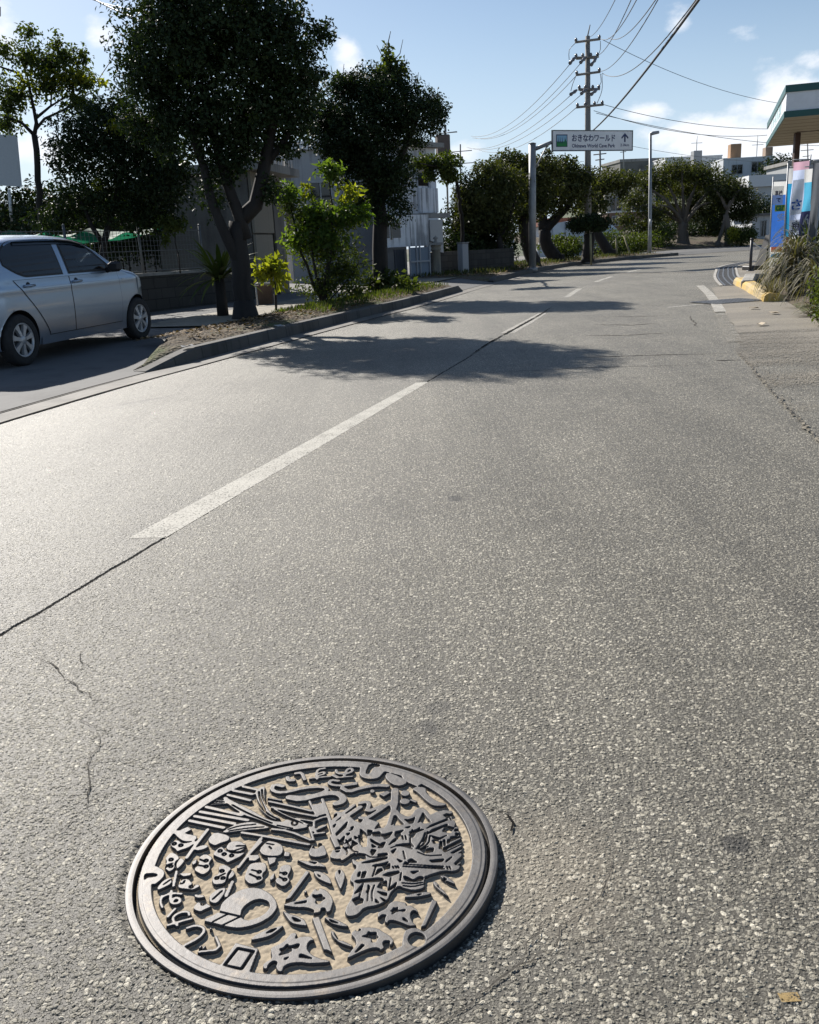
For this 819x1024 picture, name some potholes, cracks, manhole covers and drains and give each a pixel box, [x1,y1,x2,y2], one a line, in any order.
crack [479,806,515,831]
crack [28,651,129,851]
manhole cover [125,755,498,1002]
